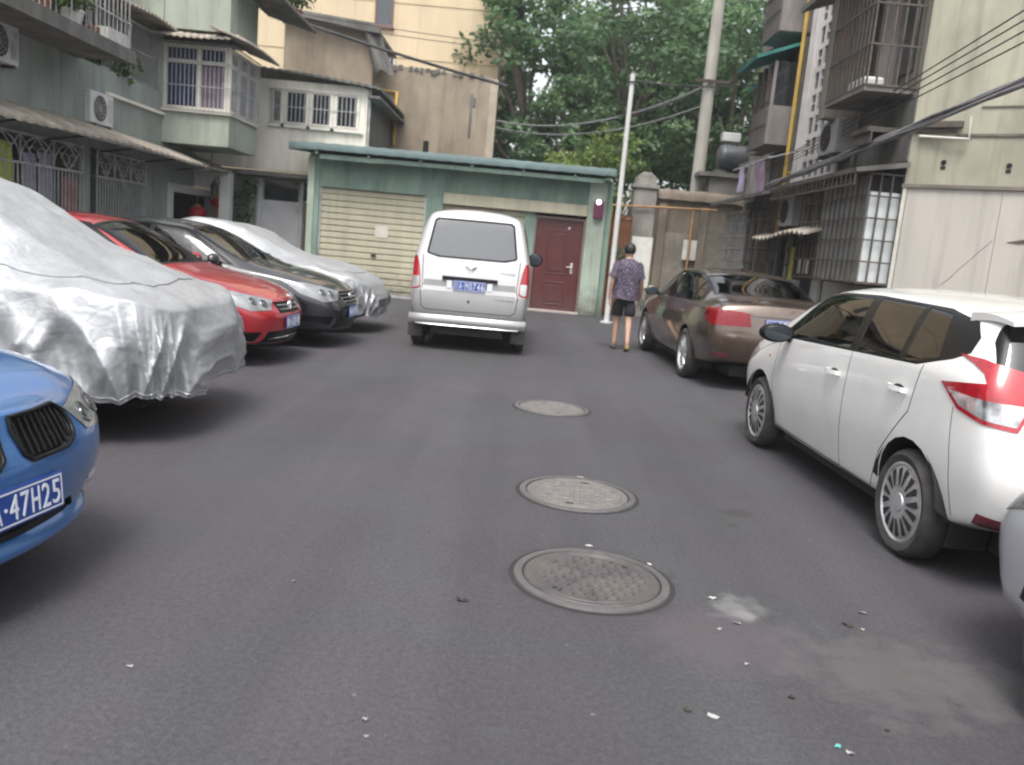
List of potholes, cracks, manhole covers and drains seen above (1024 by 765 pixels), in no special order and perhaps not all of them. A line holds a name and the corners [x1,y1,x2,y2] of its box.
manhole cover [516,476,639,514]
manhole cover [508,548,675,616]
manhole cover [512,400,591,417]
